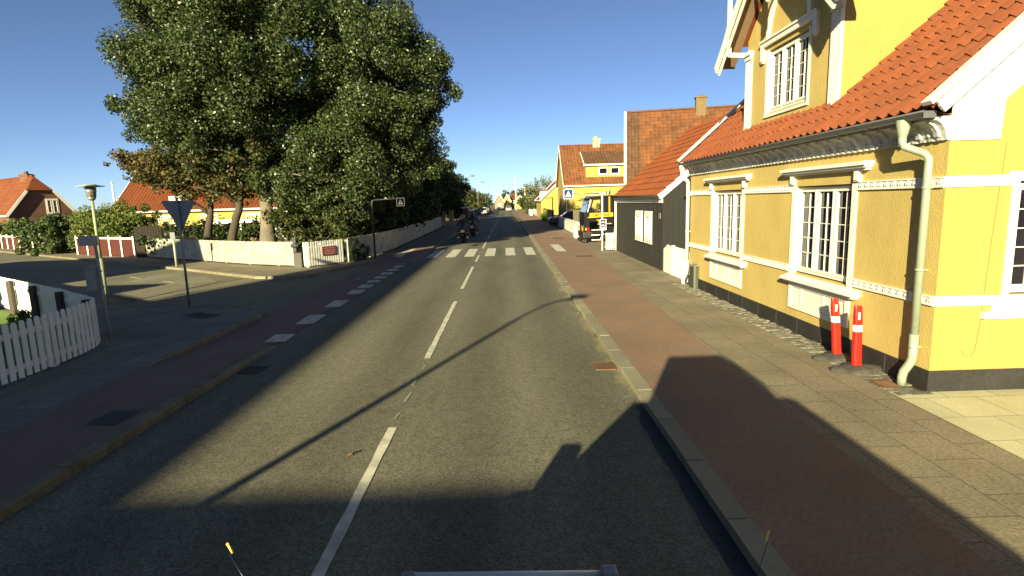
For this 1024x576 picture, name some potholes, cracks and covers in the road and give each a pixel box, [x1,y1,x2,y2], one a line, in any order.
drain grate [237,366,269,374]
drain grate [592,361,617,370]
